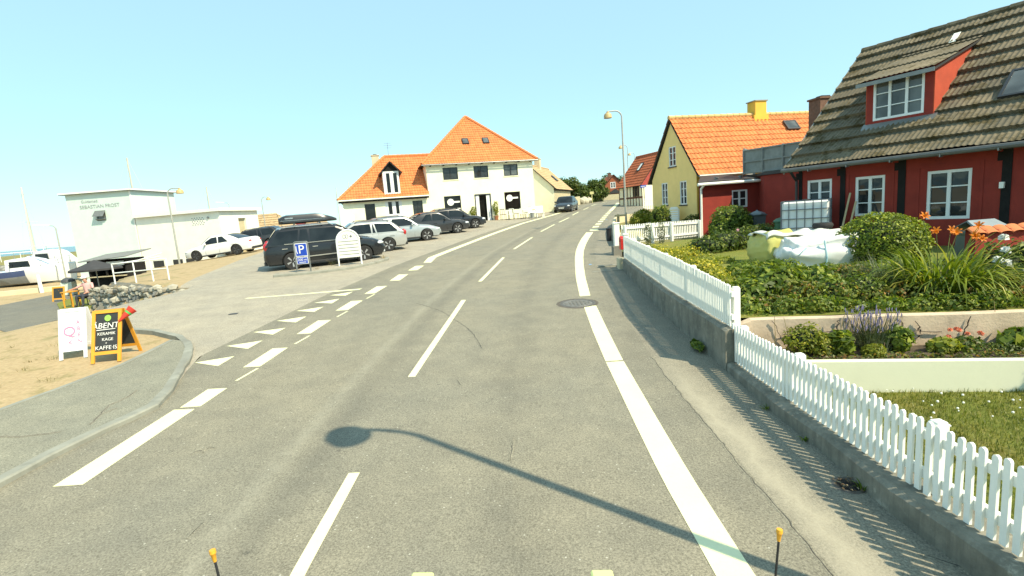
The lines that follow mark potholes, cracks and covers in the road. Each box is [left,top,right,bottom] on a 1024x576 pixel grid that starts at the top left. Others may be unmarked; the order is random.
crack [89,390,138,424]
manhole cover [556,299,599,309]
crack [416,303,483,348]
